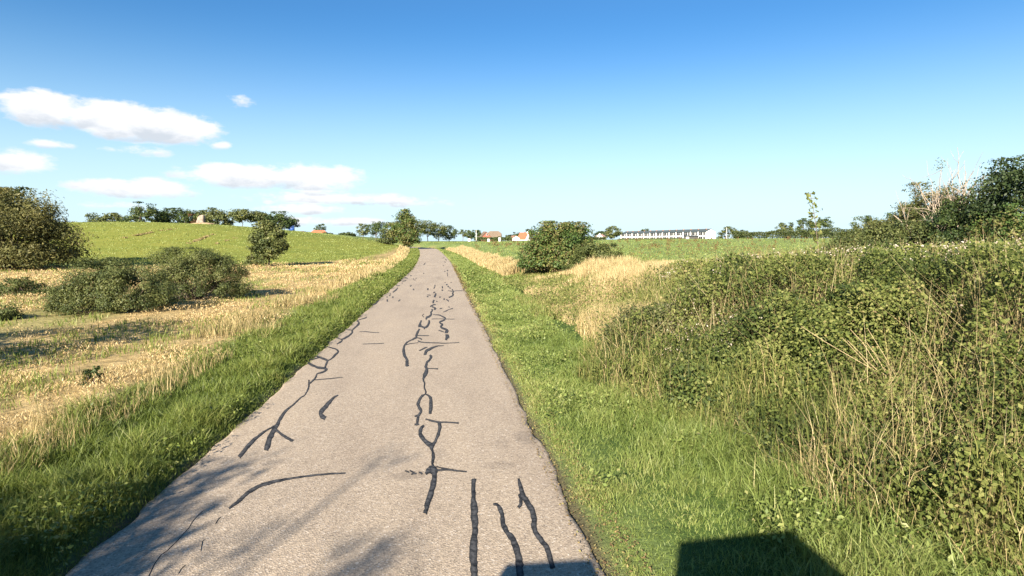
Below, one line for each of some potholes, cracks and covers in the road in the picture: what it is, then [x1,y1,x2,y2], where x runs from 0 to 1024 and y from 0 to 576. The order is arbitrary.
crack [148,511,221,576]
